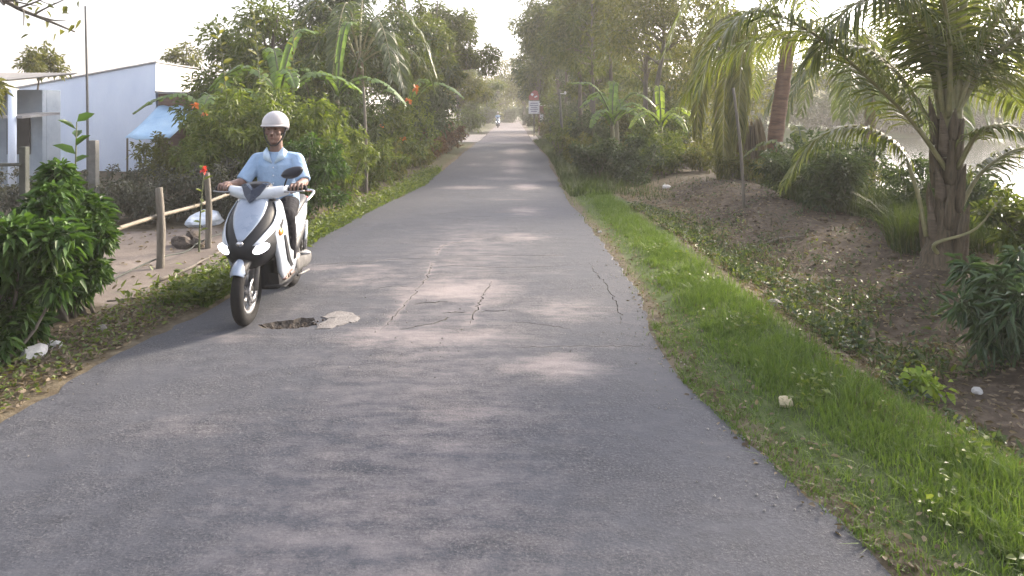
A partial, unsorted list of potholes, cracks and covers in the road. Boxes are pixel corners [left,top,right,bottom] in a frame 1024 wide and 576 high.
pothole [258,317,324,329]
crack [315,242,570,329]
